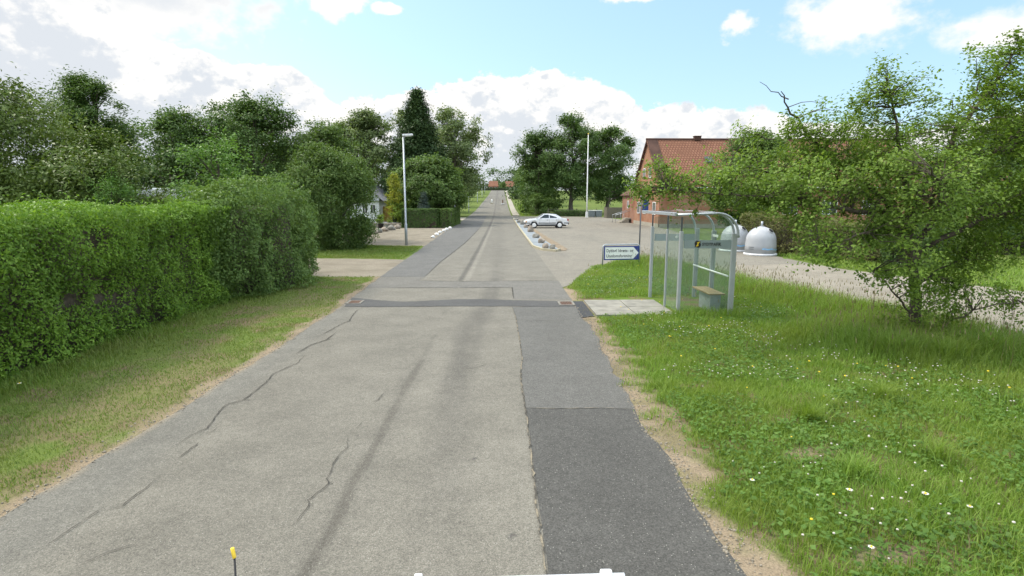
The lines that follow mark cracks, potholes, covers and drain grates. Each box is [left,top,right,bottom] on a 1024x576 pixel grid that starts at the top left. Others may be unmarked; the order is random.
crack [51,474,161,542]
crack [294,440,348,524]
crack [175,311,356,456]
